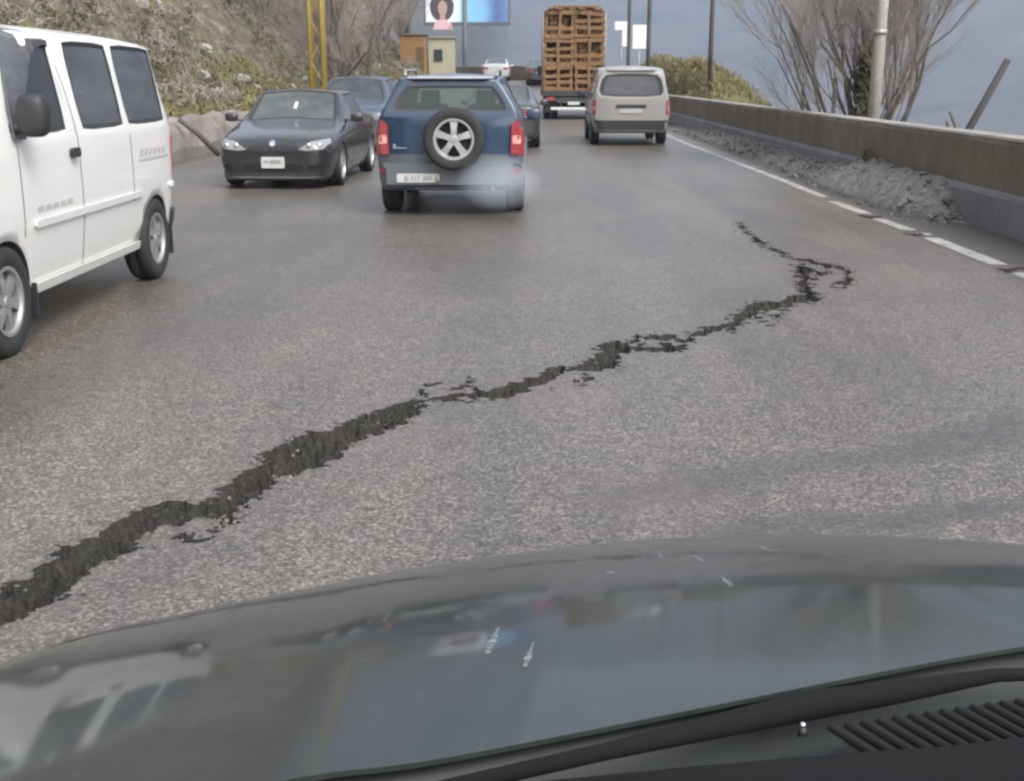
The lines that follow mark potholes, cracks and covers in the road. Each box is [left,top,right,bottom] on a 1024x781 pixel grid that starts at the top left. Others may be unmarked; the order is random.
crack [0,221,854,627]
